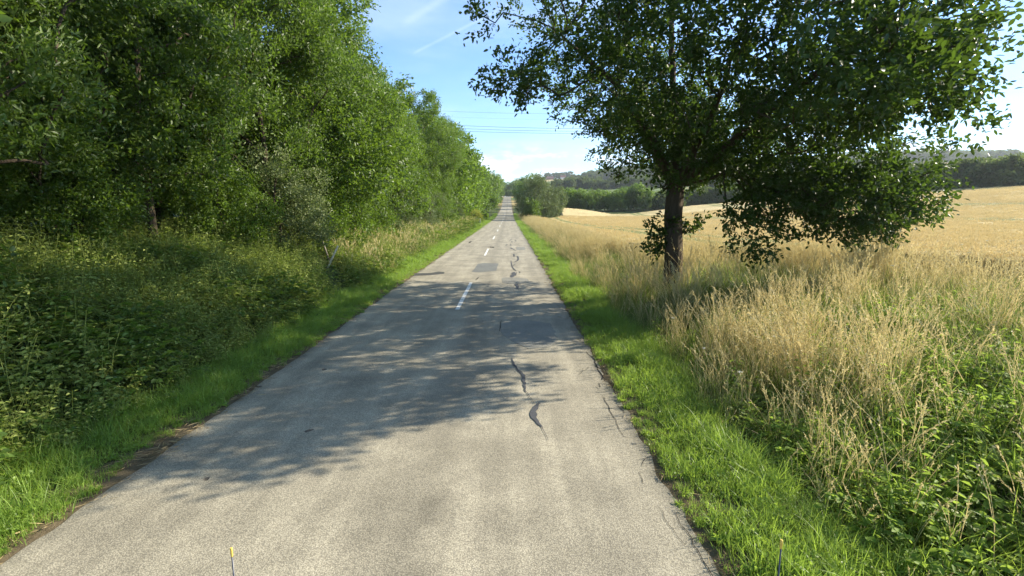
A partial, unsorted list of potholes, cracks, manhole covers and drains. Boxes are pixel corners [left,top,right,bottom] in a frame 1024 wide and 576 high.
crack [587,353,625,437]
